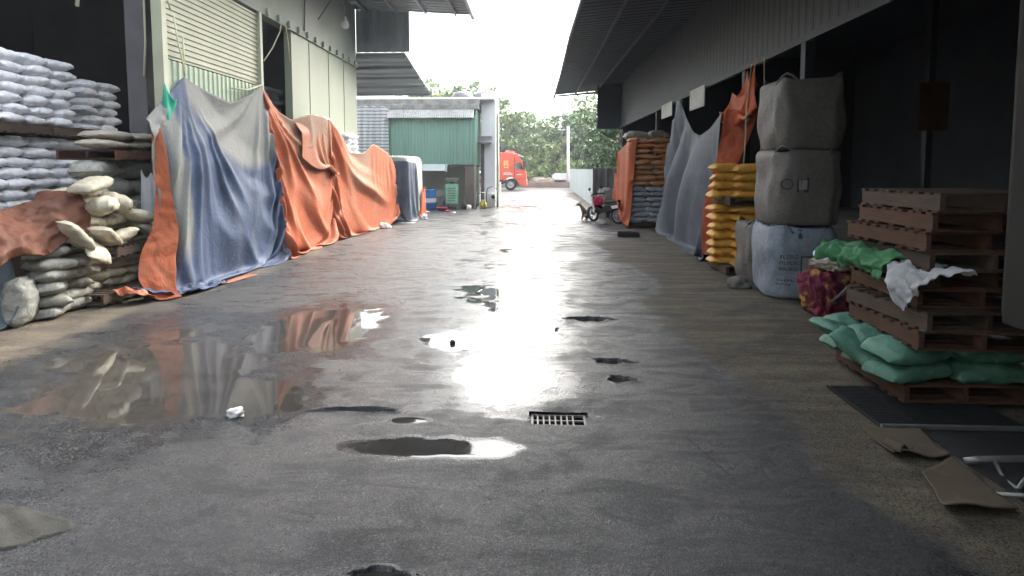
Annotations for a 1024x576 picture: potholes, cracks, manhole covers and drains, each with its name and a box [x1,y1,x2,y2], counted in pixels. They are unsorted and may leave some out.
crack [686,437,730,475]
pothole [340,562,420,576]
pothole [604,374,644,385]
drain grate [529,411,601,425]
pothole [588,357,639,366]
pothole [303,405,405,415]
